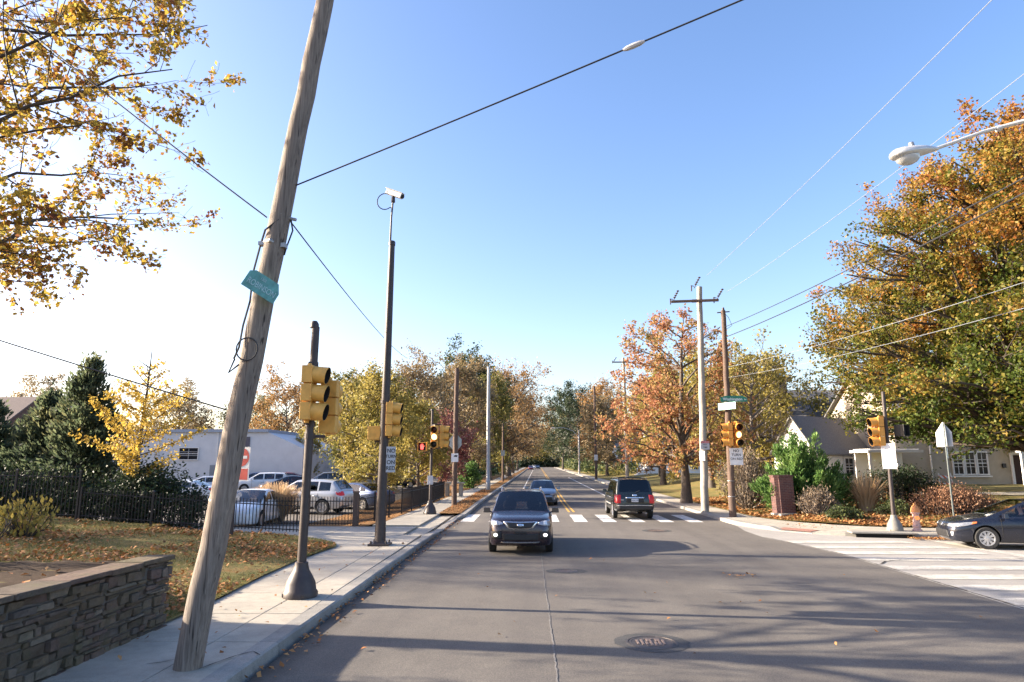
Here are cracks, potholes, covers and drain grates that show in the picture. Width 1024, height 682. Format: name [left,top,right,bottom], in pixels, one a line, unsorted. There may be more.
manhole cover [614,633,690,652]
